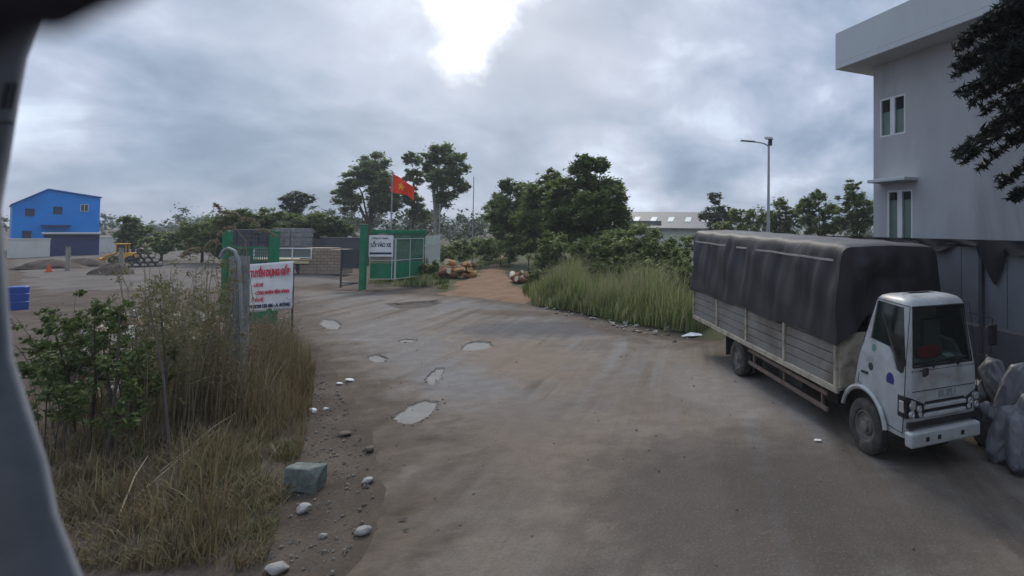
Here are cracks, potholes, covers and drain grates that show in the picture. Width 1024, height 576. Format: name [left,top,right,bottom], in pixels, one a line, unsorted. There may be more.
pothole [424,367,446,385]
pothole [460,339,493,352]
pothole [386,399,446,426]
pothole [319,318,342,329]
pothole [383,300,445,309]
pothole [367,354,389,362]
